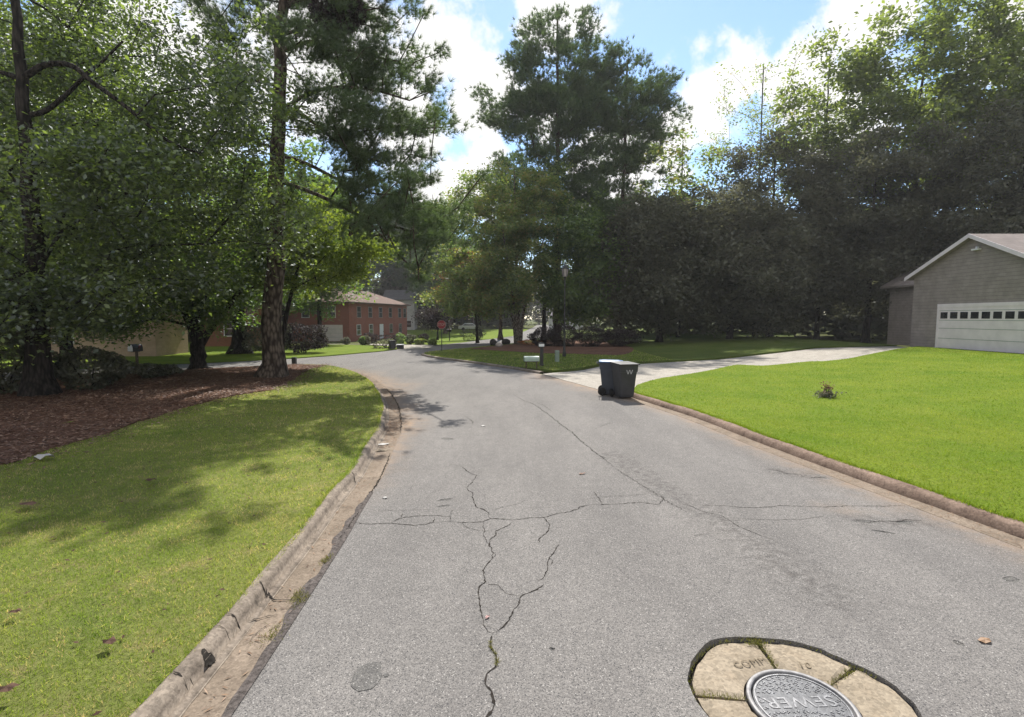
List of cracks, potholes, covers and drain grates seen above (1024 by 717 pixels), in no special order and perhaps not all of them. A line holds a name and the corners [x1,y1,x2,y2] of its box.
crack [340,455,922,717]
manhole cover [688,643,917,717]
